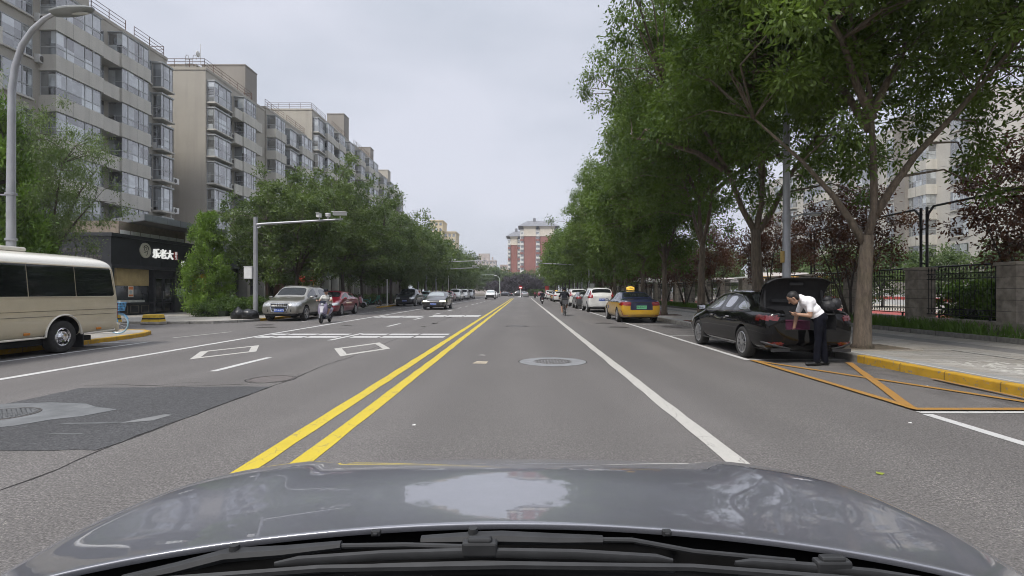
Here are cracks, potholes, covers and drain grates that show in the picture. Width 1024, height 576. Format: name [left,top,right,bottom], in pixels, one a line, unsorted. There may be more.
manhole cover [518,357,587,366]
manhole cover [0,402,118,427]
manhole cover [244,375,296,383]
